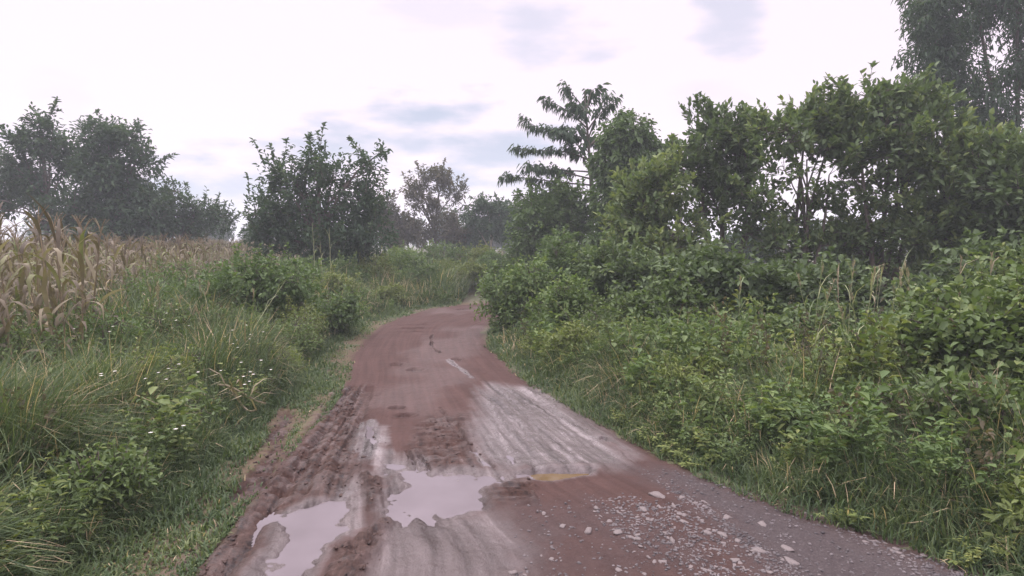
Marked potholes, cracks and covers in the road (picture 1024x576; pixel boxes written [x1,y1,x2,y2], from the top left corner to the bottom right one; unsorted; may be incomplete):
pothole [508,463,601,482]
